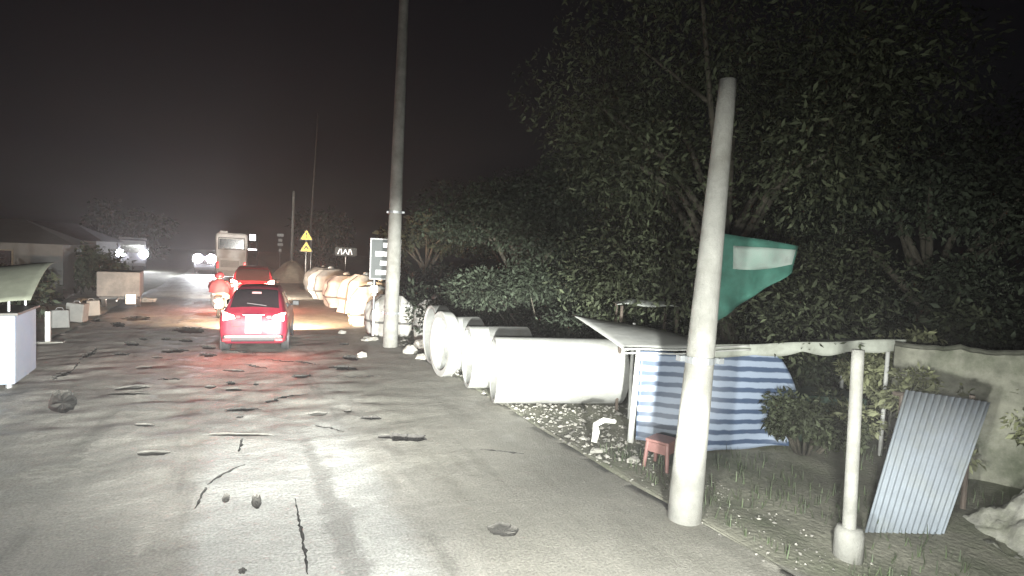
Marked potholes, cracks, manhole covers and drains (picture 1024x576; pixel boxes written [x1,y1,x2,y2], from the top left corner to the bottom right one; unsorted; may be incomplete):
pothole [251,494,262,509]
crack [265,394,304,403]
pothole [378,433,427,442]
pothole [487,522,519,537]
crack [49,348,97,380]
crack [295,498,308,574]
crack [194,439,245,509]
